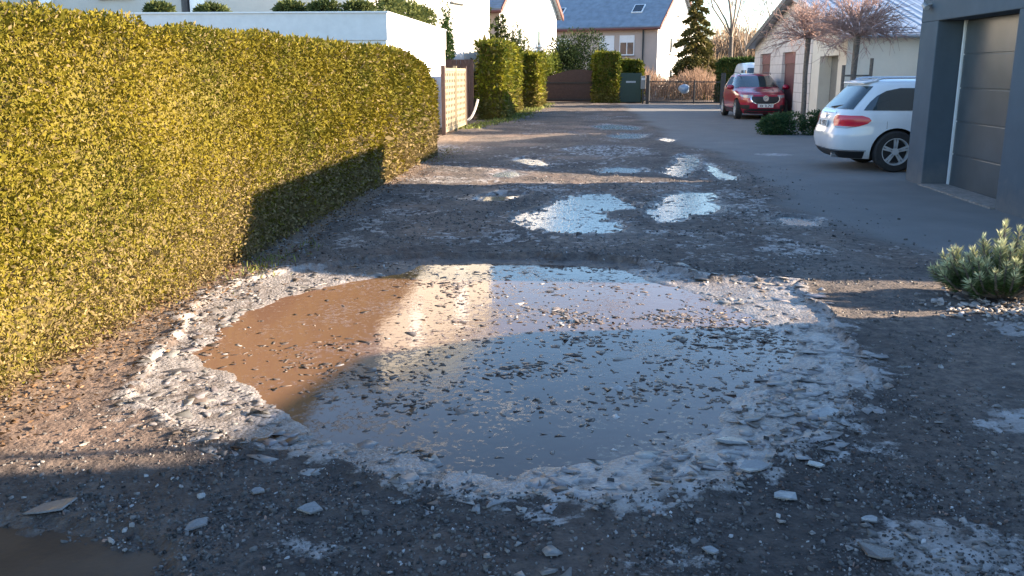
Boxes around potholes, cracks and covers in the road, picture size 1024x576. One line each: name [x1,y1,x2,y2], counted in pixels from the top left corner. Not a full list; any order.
pothole [128,251,878,500]
pothole [661,153,703,178]
pothole [640,190,724,222]
pothole [507,192,646,234]
pothole [702,161,740,179]
pothole [508,155,553,167]
